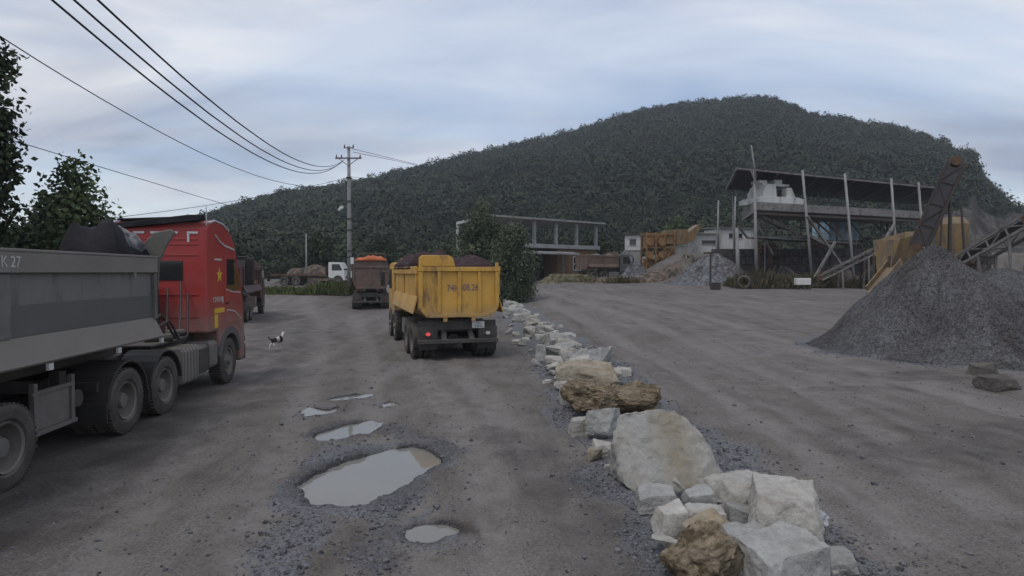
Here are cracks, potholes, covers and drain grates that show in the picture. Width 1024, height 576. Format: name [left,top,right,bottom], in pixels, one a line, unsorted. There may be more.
pothole [322,392,375,402]
pothole [375,398,406,409]
pothole [269,438,467,516]
pothole [385,511,480,550]
pothole [300,404,346,418]
pothole [300,419,383,444]
